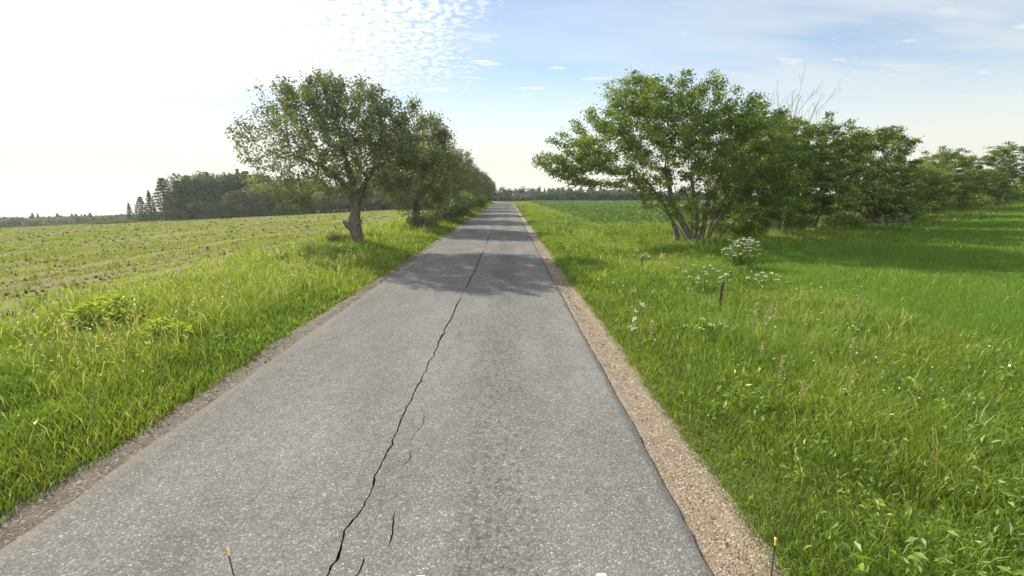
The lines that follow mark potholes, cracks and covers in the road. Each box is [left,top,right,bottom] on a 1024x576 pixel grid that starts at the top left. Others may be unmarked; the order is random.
crack [320,225,495,576]
